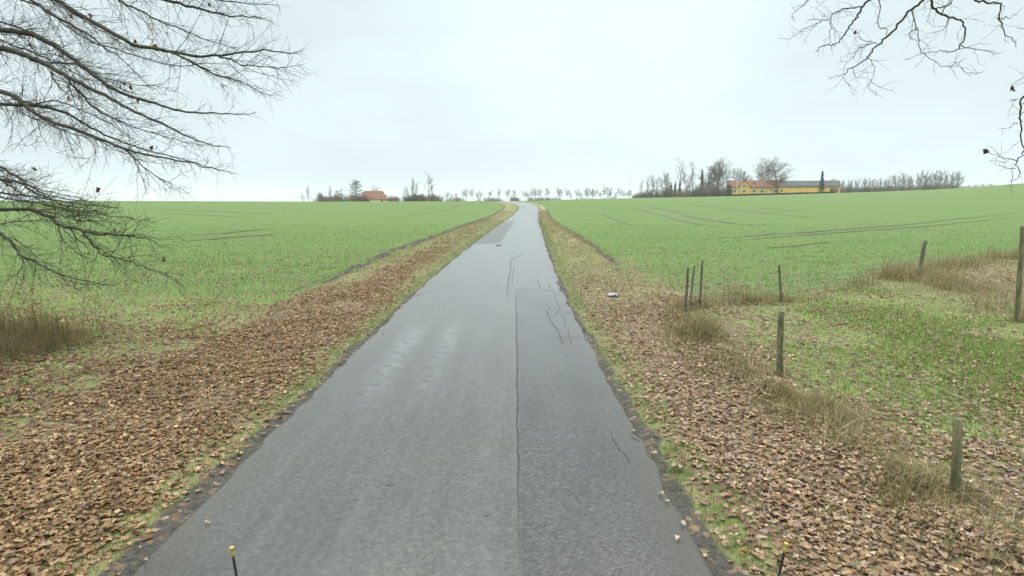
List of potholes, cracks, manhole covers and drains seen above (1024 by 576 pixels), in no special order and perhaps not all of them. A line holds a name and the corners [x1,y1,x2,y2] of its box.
crack [530,277,588,343]
